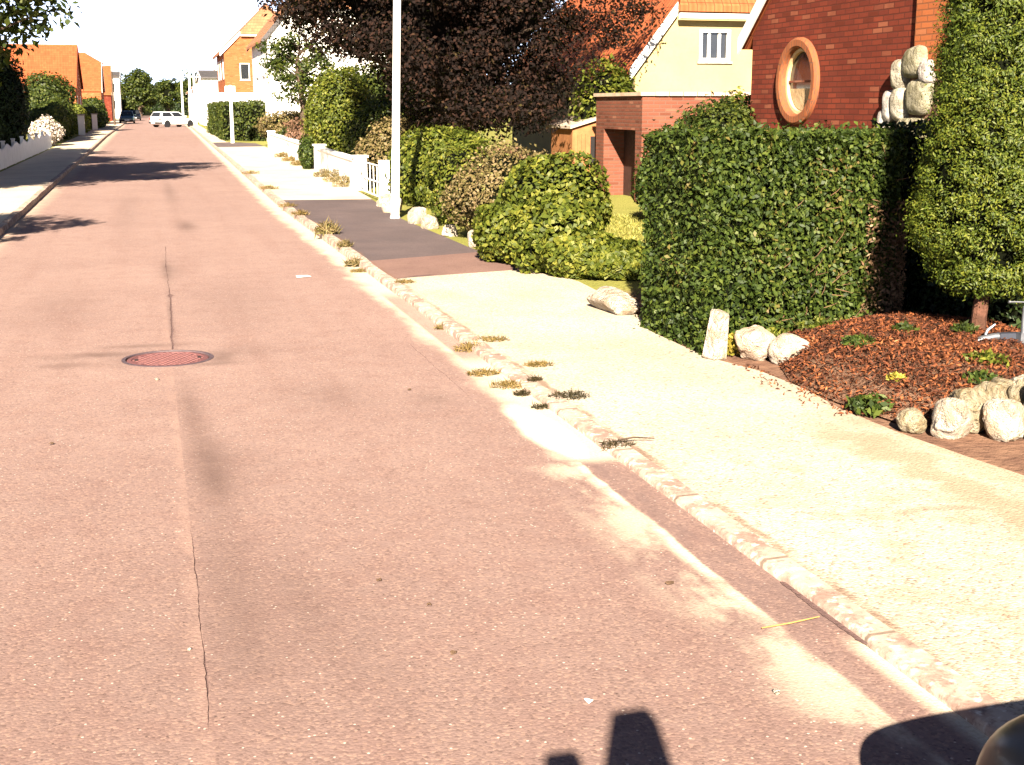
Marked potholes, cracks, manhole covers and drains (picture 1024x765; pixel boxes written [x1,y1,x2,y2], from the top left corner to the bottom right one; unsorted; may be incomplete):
crack [190,530,209,731]
manhole cover [121,350,214,367]
crack [165,247,175,349]
